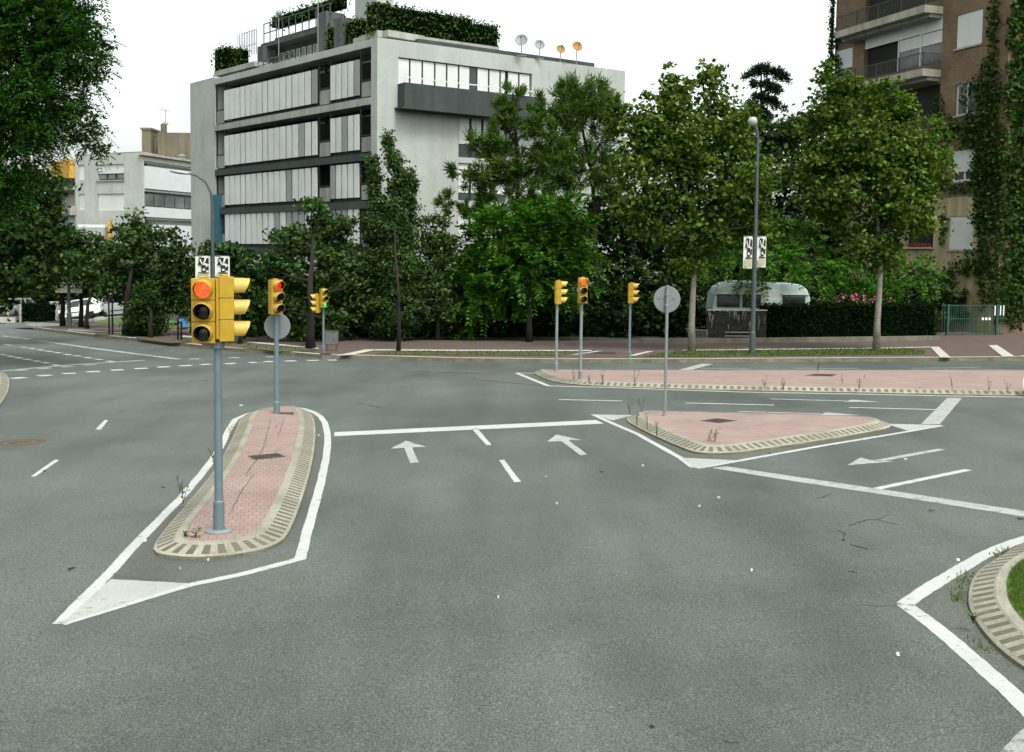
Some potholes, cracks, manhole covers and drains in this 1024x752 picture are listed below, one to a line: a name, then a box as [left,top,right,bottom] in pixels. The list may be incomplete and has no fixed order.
crack [838,514,899,550]
